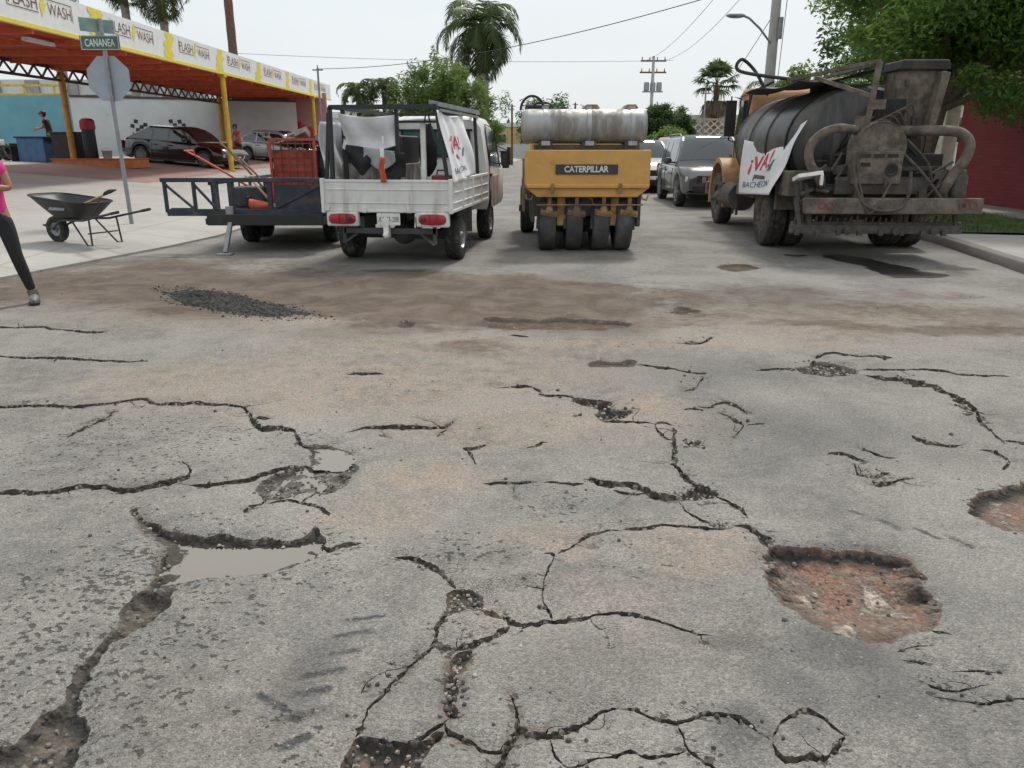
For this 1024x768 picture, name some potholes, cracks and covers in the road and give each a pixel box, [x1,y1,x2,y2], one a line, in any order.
crack [0,554,172,768]
crack [0,398,319,447]
crack [0,351,150,363]
crack [679,337,712,345]
pothole [966,482,1024,534]
crack [324,542,361,553]
pothole [129,505,326,605]
pothole [444,589,504,620]
crack [827,449,933,487]
crack [815,352,1020,470]
pothole [443,651,473,719]
pothole [340,731,444,768]
